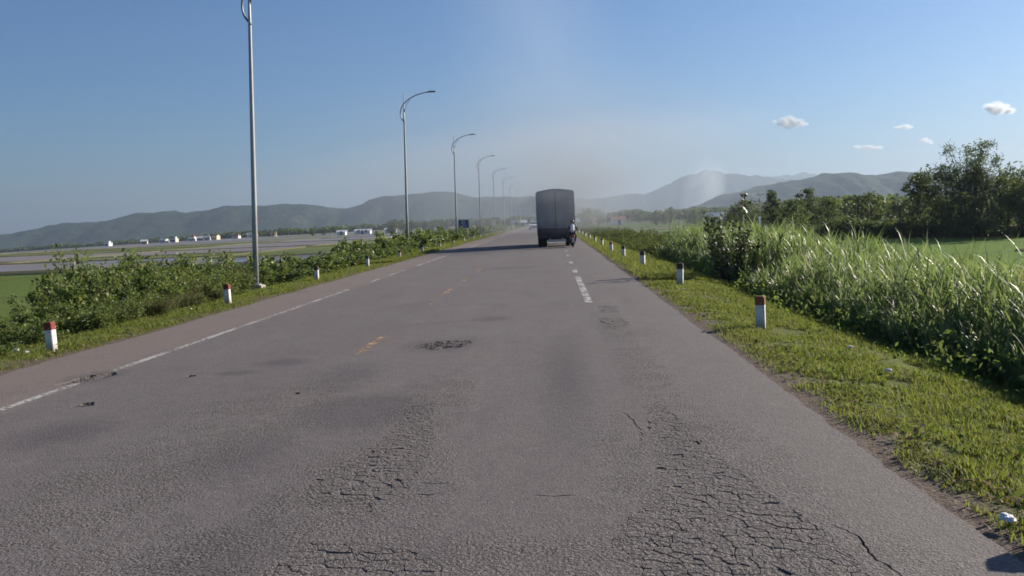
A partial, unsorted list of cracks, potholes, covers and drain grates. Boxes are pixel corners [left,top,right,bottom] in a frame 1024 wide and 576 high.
pothole [55,372,118,385]
crack [611,401,902,576]
crack [259,541,442,576]
pothole [410,340,472,350]
crack [297,403,449,518]
